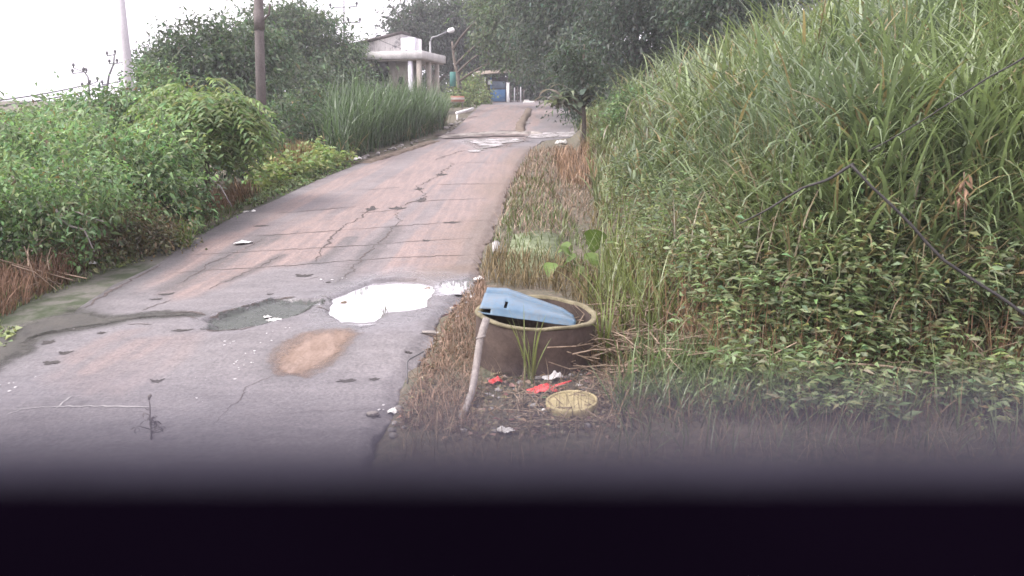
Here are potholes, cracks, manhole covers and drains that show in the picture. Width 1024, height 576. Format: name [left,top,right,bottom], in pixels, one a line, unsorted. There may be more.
pothole [198,297,326,331]
pothole [318,282,435,325]
crack [137,130,524,331]
pothole [436,279,476,295]
